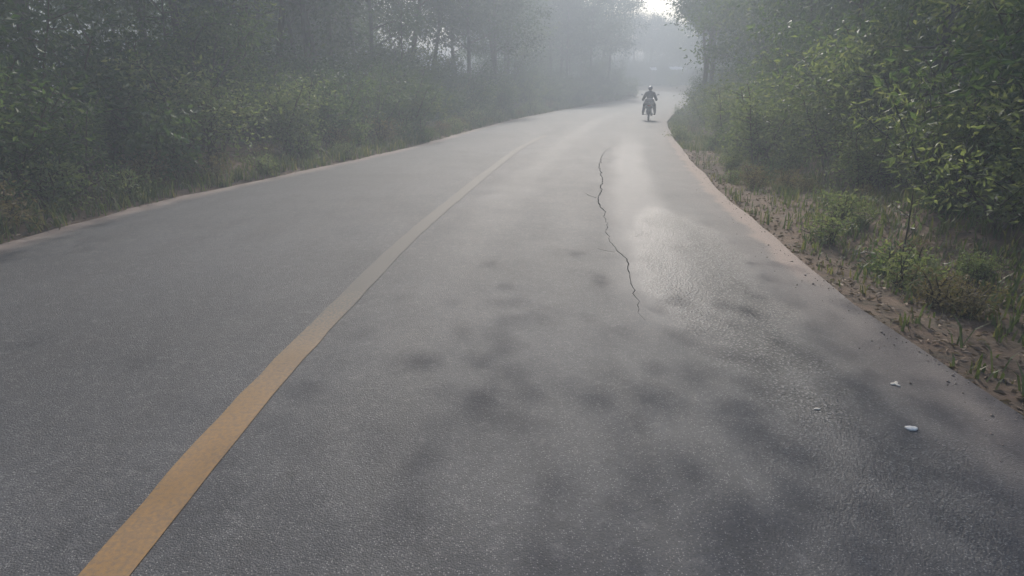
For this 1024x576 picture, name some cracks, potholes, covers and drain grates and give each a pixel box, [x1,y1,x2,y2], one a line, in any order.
crack [587,149,645,320]
